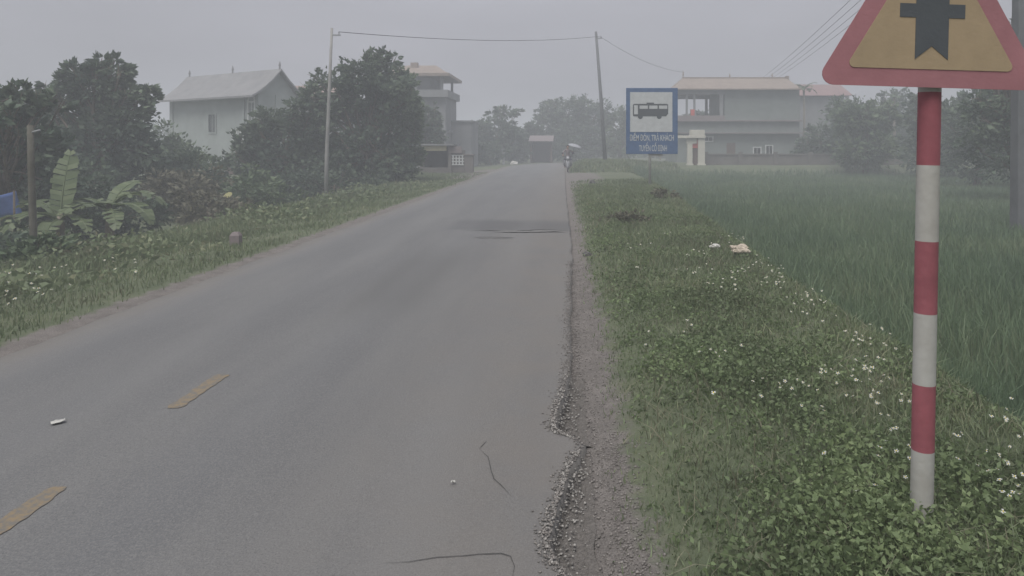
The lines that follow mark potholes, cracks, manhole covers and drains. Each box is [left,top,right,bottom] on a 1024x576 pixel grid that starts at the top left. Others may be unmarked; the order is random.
crack [388,553,515,573]
pothole [545,373,591,447]
pothole [534,449,603,576]
